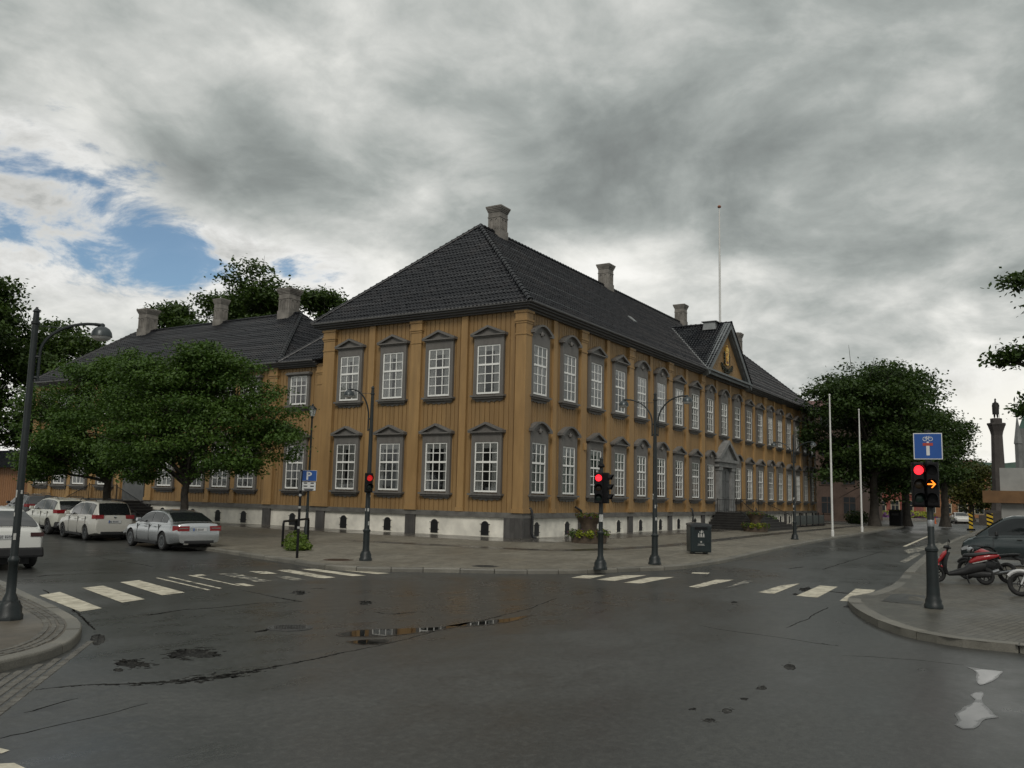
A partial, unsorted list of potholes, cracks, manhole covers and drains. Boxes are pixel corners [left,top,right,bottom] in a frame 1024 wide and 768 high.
pothole [113,658,160,670]
pothole [86,634,105,648]
crack [0,598,557,739]
pothole [160,647,226,660]
